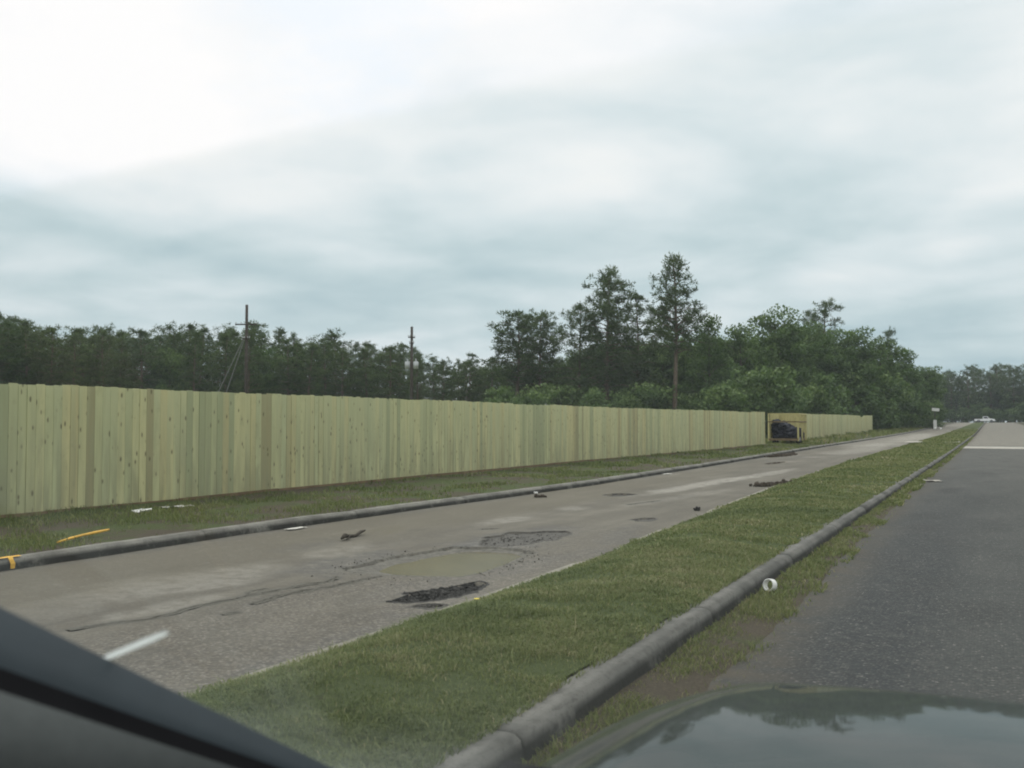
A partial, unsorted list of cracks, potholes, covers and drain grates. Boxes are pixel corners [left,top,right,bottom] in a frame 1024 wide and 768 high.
pothole [386,581,490,604]
pothole [478,531,572,547]
pothole [311,546,549,585]
crack [66,576,382,631]
